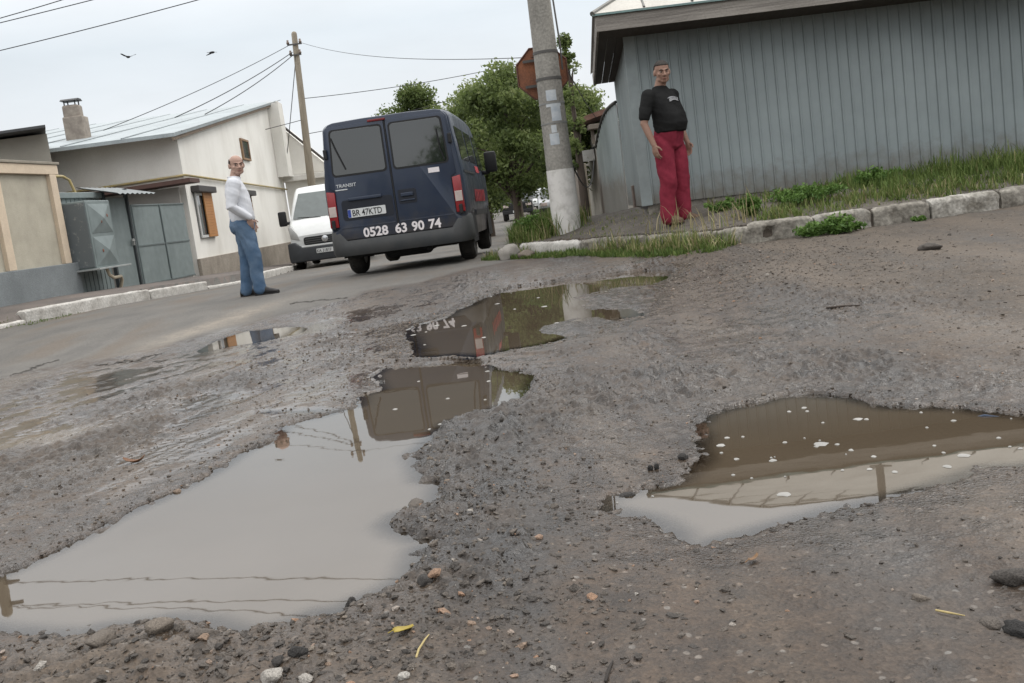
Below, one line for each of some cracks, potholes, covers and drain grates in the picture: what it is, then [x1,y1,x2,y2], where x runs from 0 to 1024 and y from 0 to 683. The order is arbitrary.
pothole [0,357,545,640]
pothole [577,386,1024,554]
pothole [185,322,319,356]
pothole [394,263,688,364]
